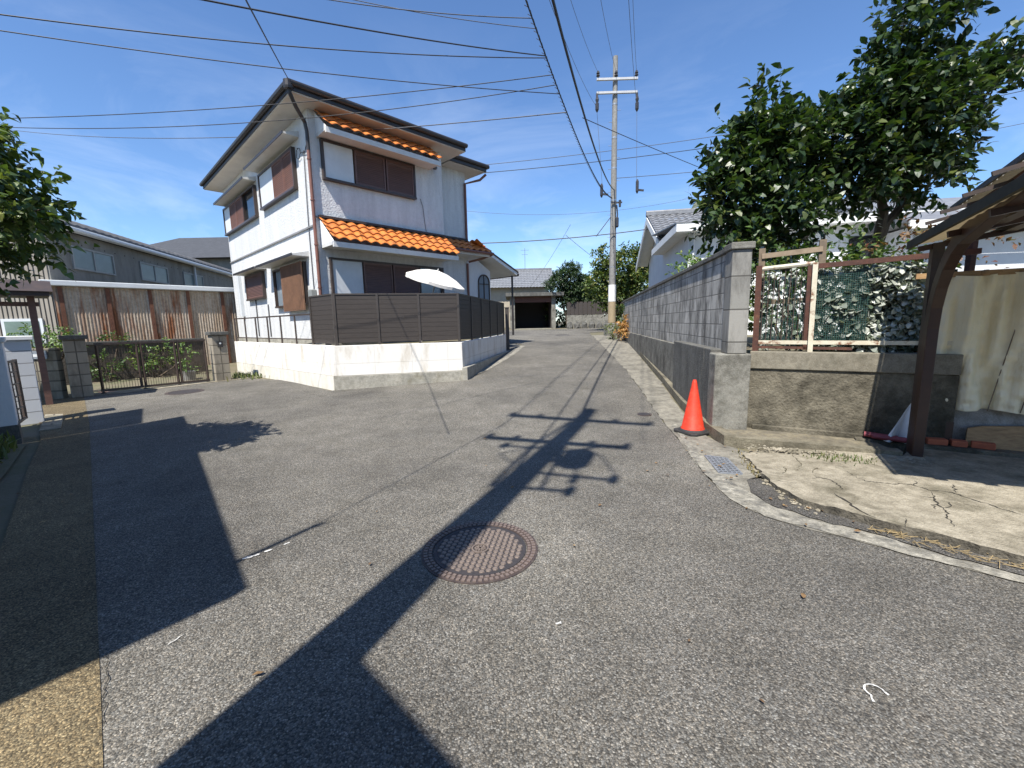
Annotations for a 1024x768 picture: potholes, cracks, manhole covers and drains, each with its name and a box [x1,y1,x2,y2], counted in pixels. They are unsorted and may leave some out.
manhole cover [421,521,538,585]
crack [97,651,109,735]
crack [812,468,1016,526]
drain grate [704,455,743,475]
